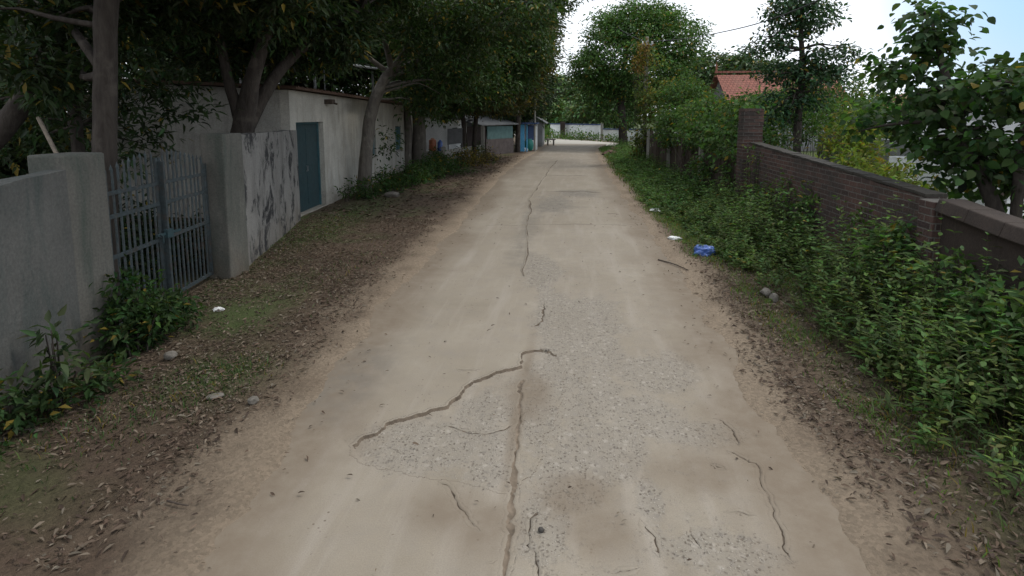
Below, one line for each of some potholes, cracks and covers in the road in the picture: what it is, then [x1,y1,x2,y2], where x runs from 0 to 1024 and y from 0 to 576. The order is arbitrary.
crack [531,302,548,327]
crack [437,480,481,532]
crack [612,518,664,576]
crack [710,418,795,564]
crack [442,424,514,436]
crack [522,508,545,576]
